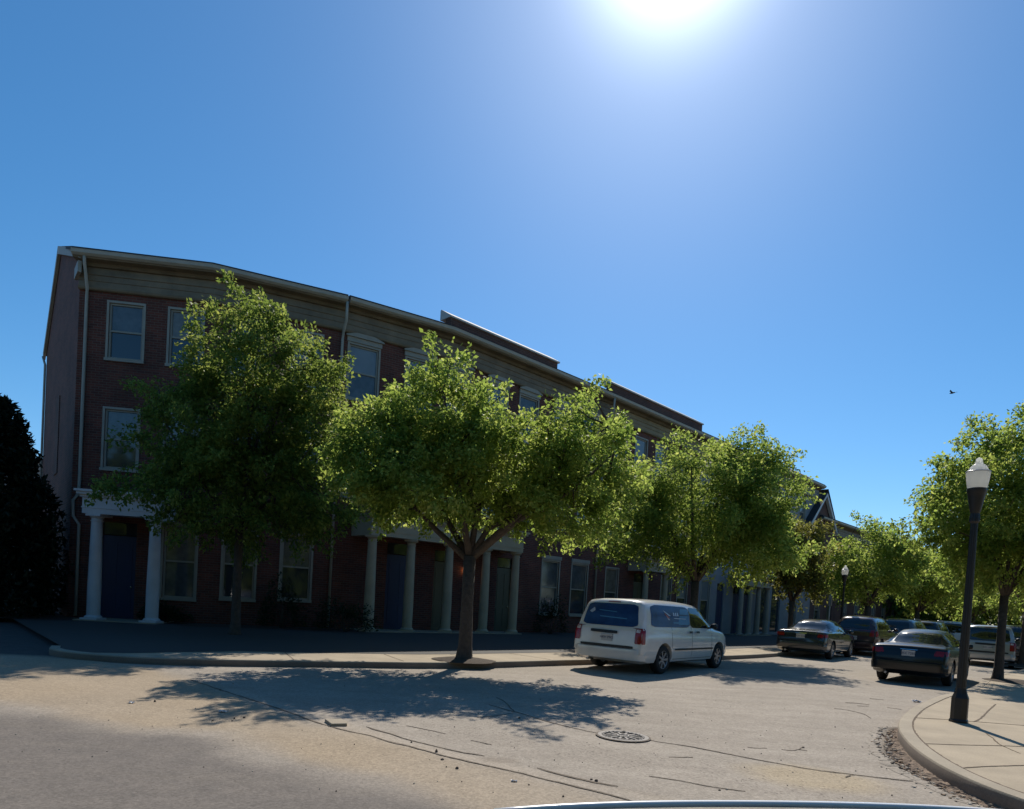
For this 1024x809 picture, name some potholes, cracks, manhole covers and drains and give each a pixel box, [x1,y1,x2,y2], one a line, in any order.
manhole cover [596,730,651,743]
